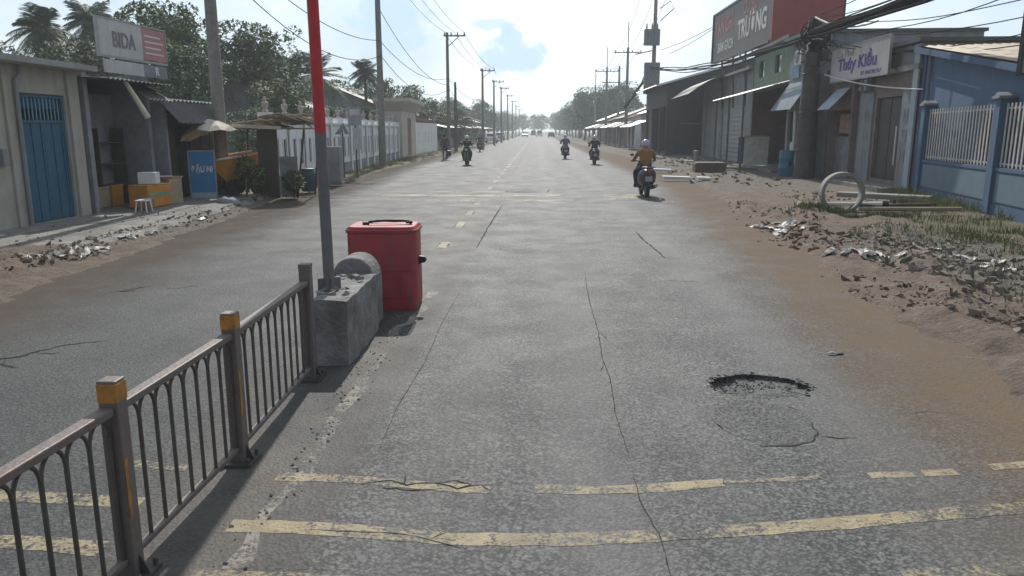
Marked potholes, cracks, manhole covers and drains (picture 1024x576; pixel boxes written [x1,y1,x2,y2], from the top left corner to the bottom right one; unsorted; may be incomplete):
crack [585,276,632,463]
crack [634,479,671,576]
crack [759,422,852,446]
crack [362,475,500,490]
pothole [706,372,817,400]
crack [0,341,100,368]
crack [308,529,468,550]
